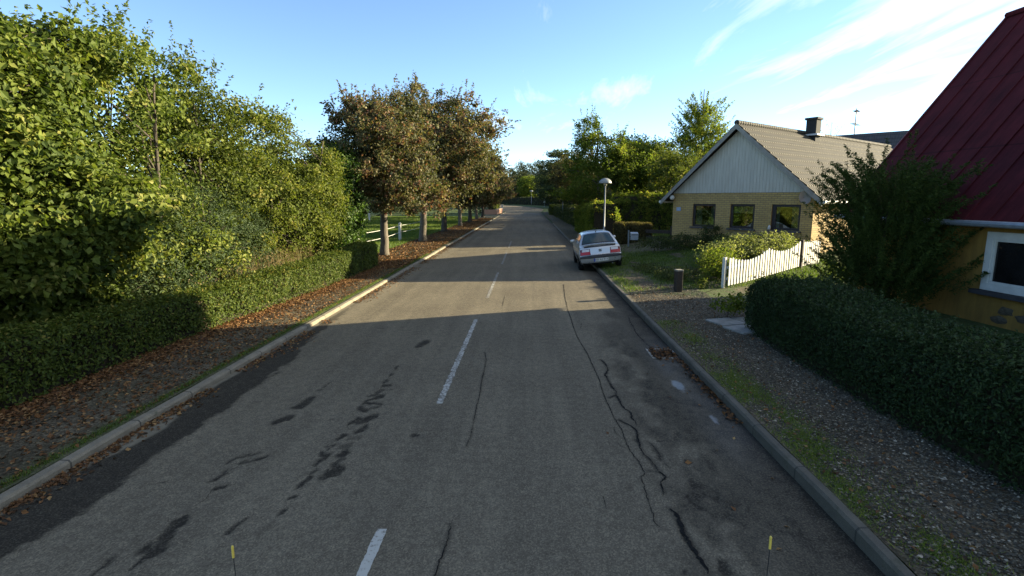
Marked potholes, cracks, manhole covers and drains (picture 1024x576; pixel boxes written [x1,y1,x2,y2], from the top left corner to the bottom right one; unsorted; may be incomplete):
crack [563,285,709,573]
crack [434,526,451,576]
